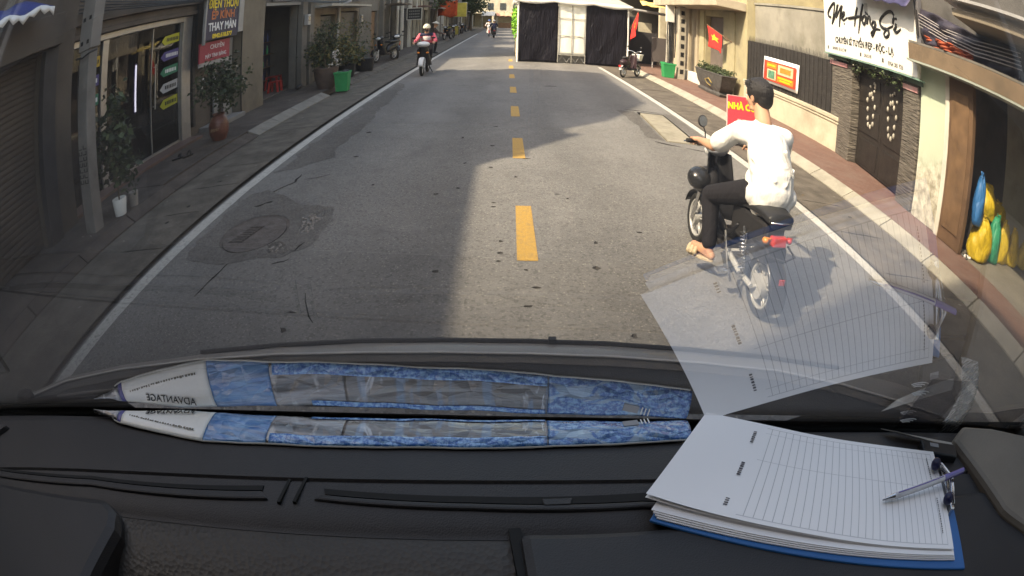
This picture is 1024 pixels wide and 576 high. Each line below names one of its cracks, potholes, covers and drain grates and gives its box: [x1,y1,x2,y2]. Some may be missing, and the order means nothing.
manhole cover [219,215,290,253]
